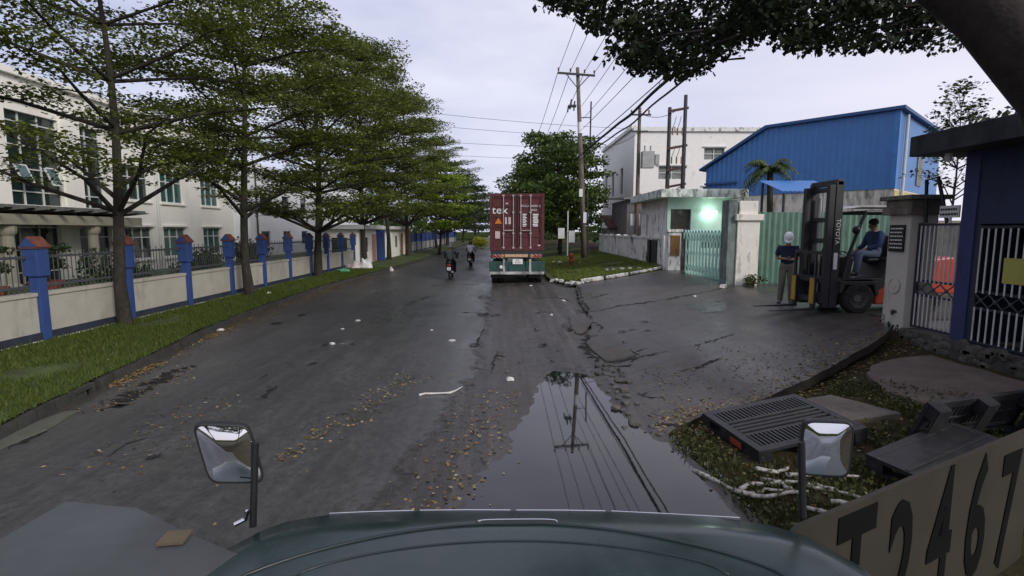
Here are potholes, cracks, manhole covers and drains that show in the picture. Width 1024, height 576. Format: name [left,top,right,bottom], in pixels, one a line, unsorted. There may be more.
crack [682,334,733,371]
crack [638,392,680,427]
crack [577,287,730,367]
crack [465,312,506,373]
